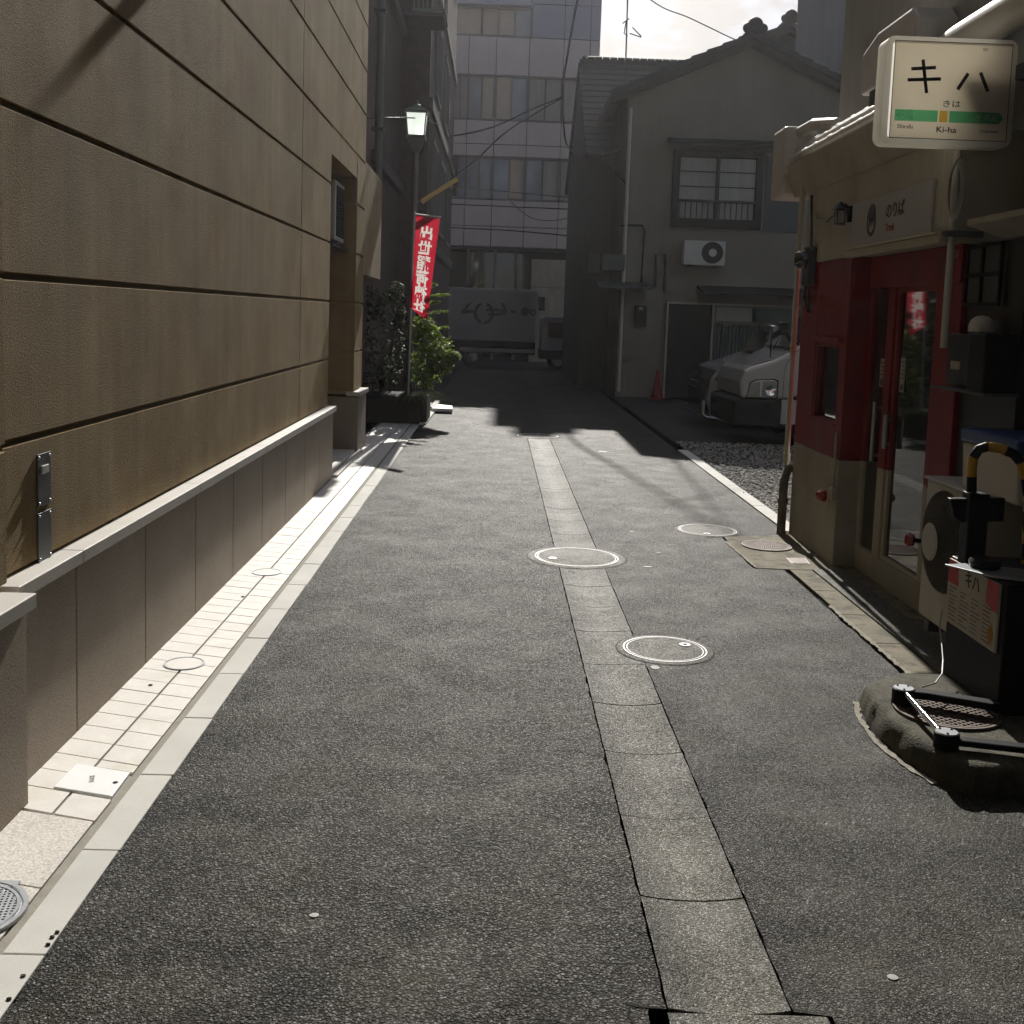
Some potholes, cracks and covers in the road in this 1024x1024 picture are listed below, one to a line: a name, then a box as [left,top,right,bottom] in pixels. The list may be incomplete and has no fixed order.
manhole cover [527,547,627,569]
drain grate [0,880,29,932]
manhole cover [892,699,1003,731]
manhole cover [674,524,741,539]
manhole cover [741,540,792,552]
crack [625,1002,665,1024]
manhole cover [615,635,715,665]
utility cover [54,764,130,800]
